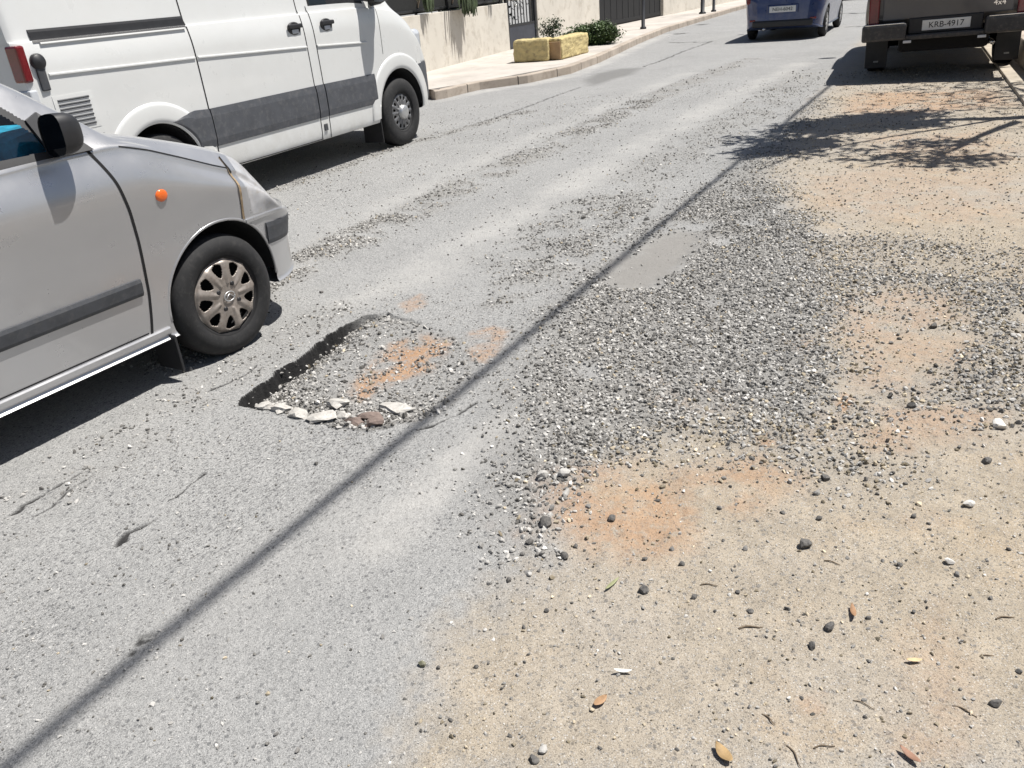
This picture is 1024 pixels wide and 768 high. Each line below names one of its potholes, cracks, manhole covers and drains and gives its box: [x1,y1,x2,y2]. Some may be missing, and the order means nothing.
pothole [238,312,483,433]
crack [113,471,209,548]
crack [8,471,94,517]
